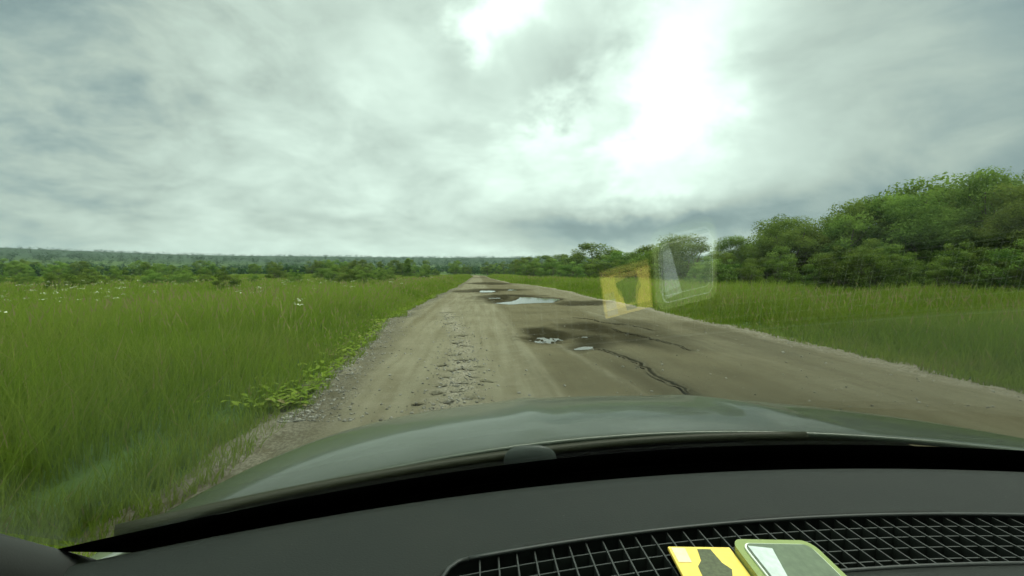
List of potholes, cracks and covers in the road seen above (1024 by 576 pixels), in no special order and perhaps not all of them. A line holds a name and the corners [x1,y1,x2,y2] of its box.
pothole [485,296,568,305]
crack [573,317,692,395]
pothole [565,342,605,350]
pothole [510,333,583,344]
